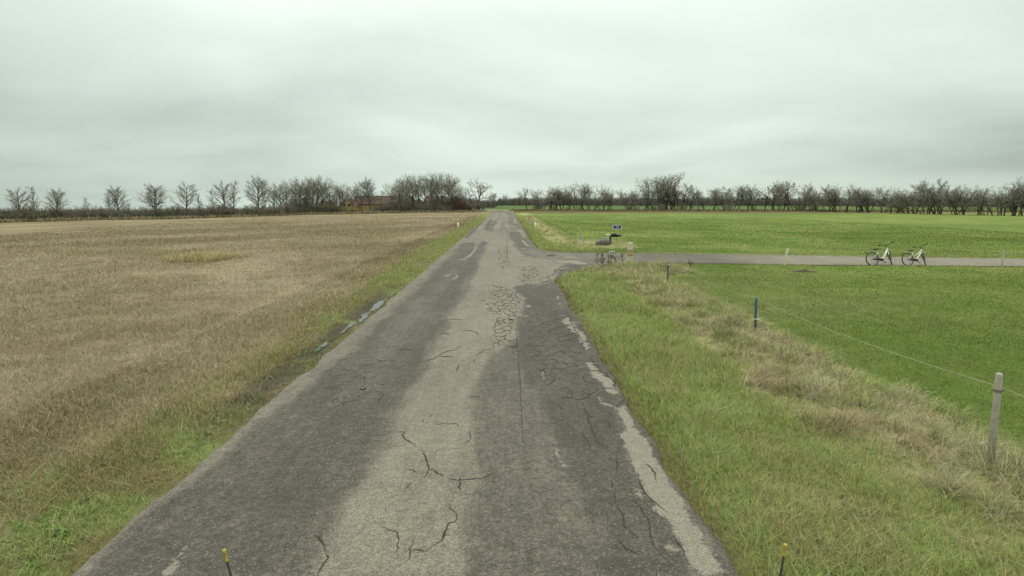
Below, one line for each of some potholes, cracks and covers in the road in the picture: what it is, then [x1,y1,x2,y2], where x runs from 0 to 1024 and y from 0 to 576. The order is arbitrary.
crack [325,231,685,575]
